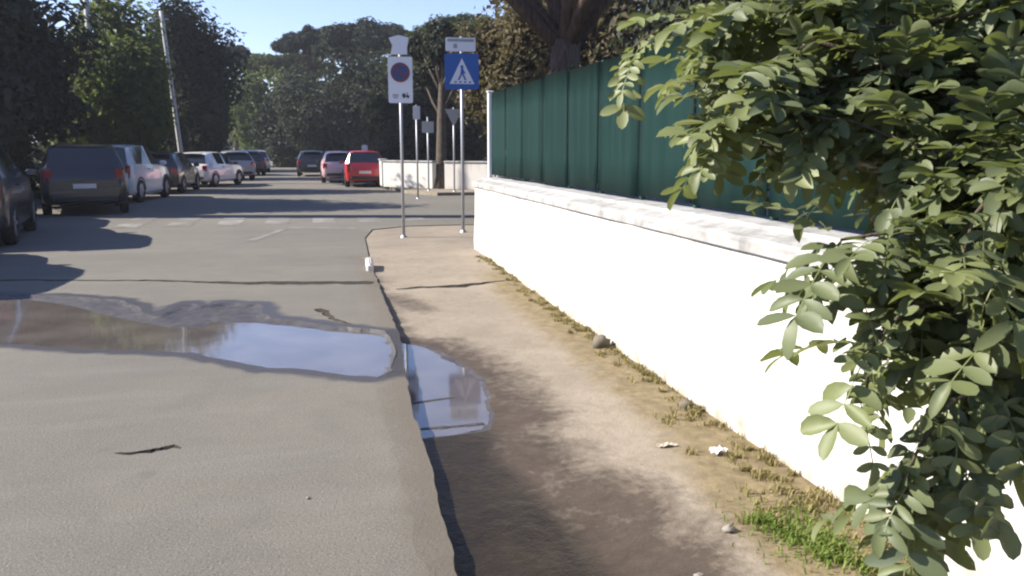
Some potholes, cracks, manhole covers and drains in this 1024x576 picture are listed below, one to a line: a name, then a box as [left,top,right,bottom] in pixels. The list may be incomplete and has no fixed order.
crack [396,280,506,290]
crack [314,308,351,324]
crack [115,444,182,455]
